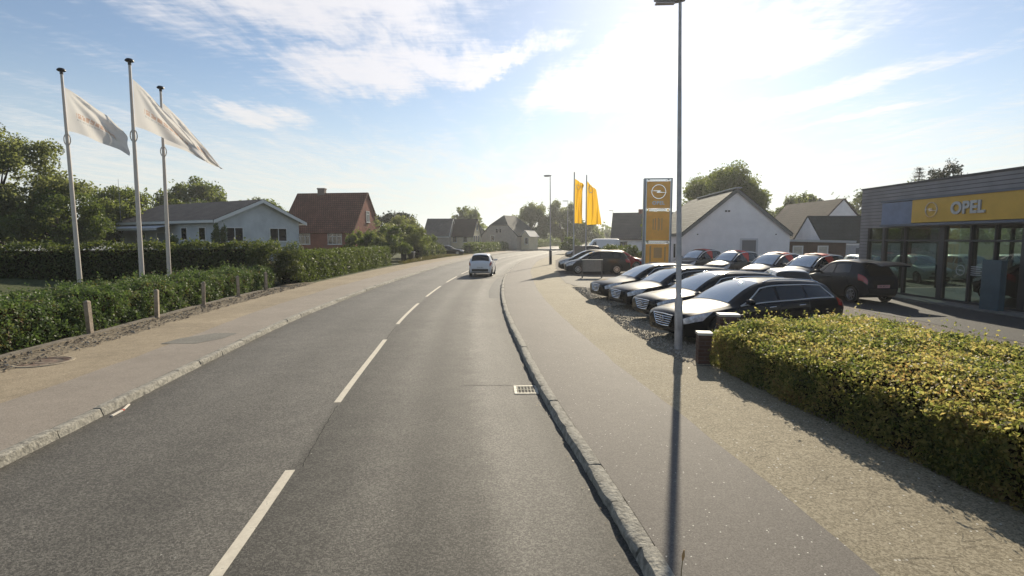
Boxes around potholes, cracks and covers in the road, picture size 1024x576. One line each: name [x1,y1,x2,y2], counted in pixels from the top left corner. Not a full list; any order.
manhole cover [11,356,76,368]
drain grate [514,385,539,394]
